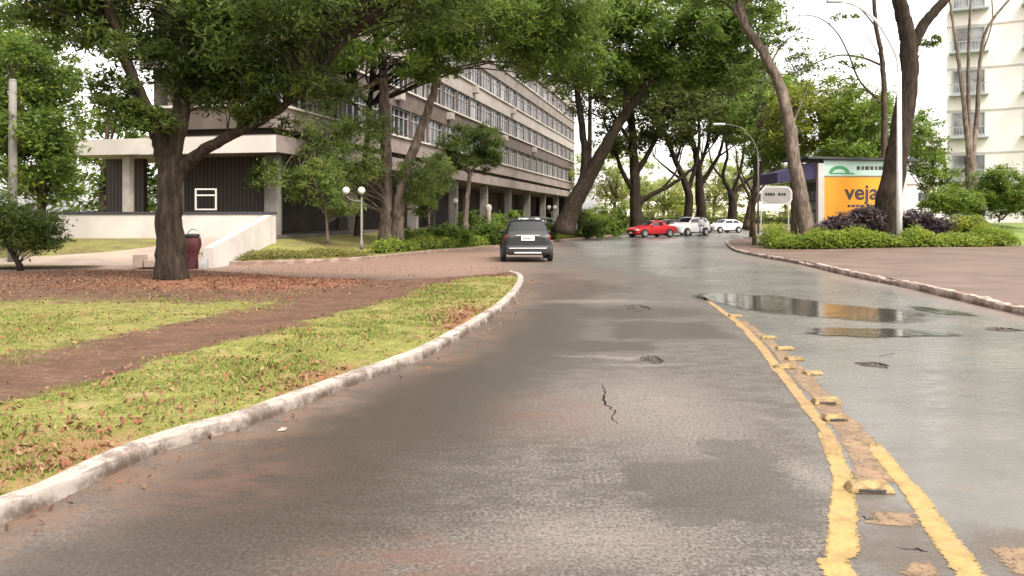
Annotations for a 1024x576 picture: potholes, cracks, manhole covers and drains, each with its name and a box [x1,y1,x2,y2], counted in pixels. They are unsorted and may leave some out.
pothole [639,356,664,364]
crack [602,385,618,424]
